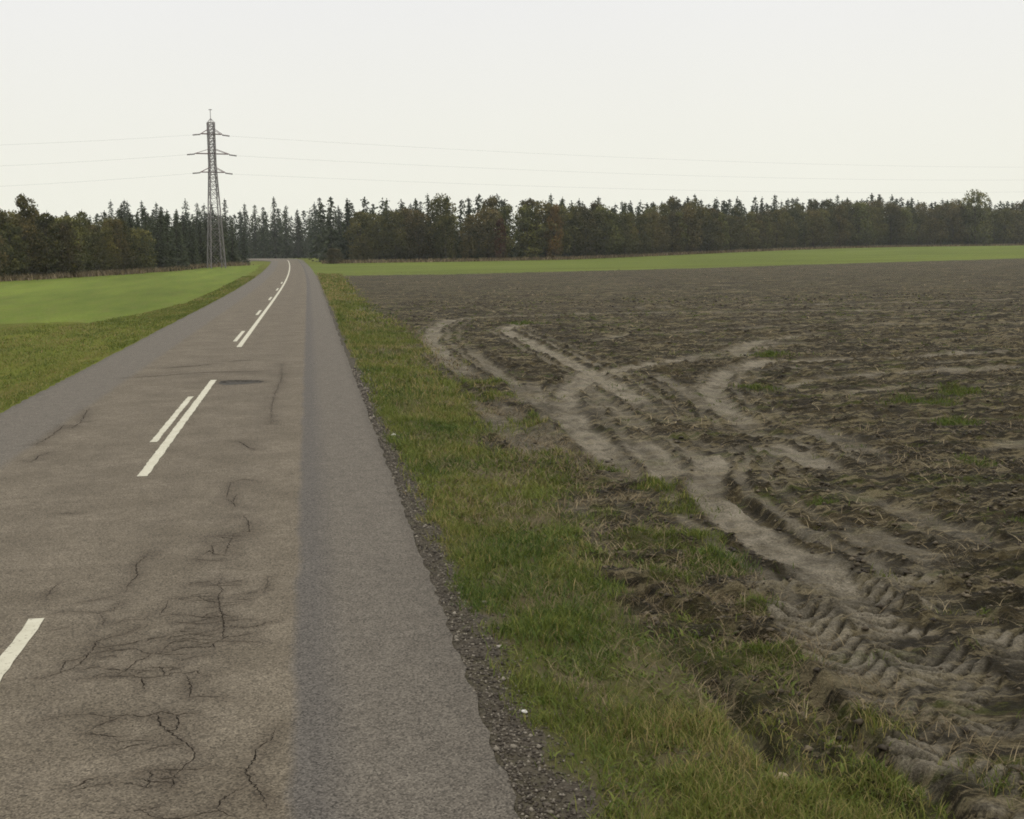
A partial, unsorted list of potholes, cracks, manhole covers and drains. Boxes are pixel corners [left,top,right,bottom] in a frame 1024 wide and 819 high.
crack [134,728,276,819]
crack [198,479,253,561]
crack [42,552,274,793]
